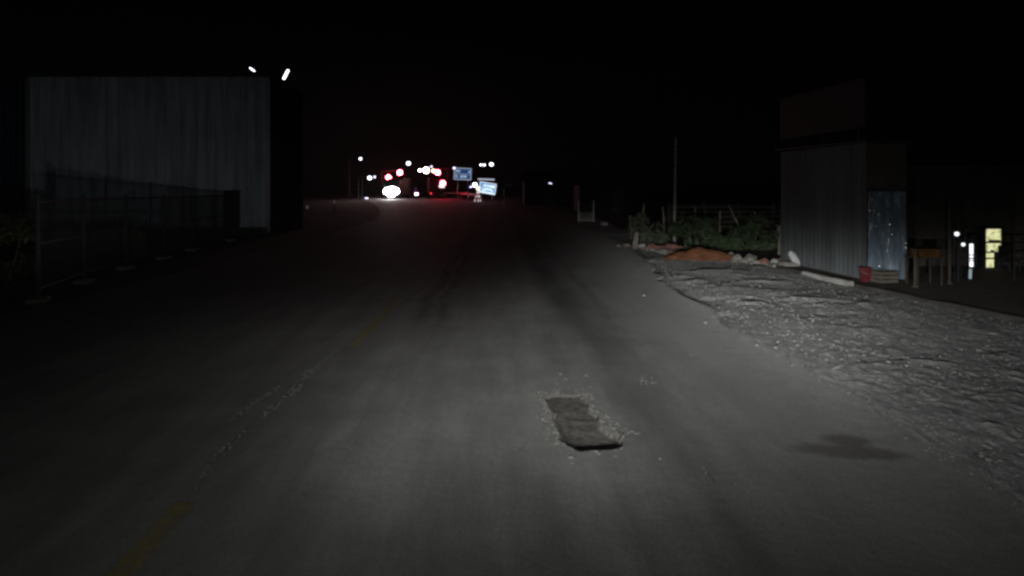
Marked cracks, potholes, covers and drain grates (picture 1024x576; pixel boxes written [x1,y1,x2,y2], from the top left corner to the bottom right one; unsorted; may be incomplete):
pothole [529,373,662,464]
